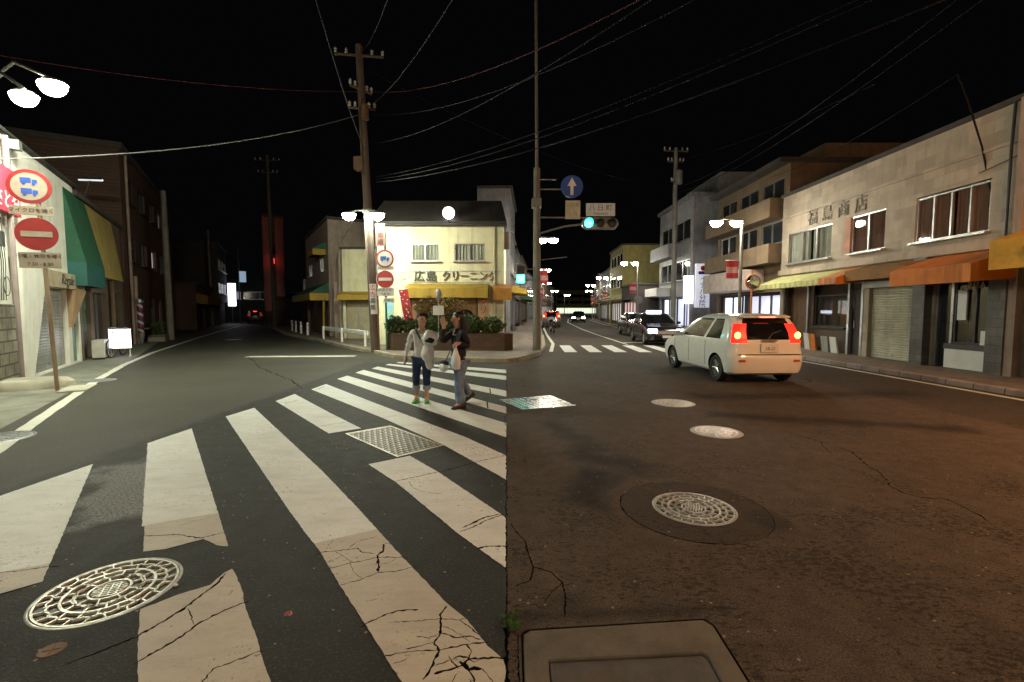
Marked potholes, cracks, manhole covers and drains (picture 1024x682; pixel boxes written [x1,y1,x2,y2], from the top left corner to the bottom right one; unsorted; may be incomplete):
crack [796,434,990,523]
crack [67,576,249,664]
manhole cover [690,426,744,439]
manhole cover [523,620,748,682]
manhole cover [0,431,37,443]
manhole cover [652,492,738,526]
manhole cover [651,399,696,407]
manhole cover [501,395,575,409]
manhole cover [23,558,183,630]
crack [314,545,417,588]
